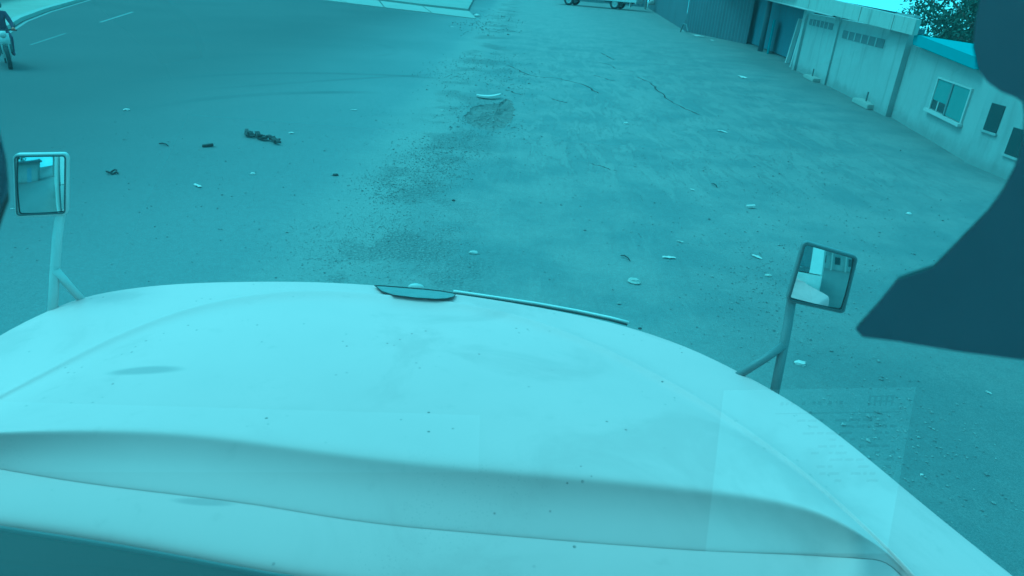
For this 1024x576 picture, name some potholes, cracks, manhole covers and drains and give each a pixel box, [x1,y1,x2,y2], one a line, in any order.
crack [507,53,616,95]
pothole [464,99,516,131]
crack [638,77,699,115]
